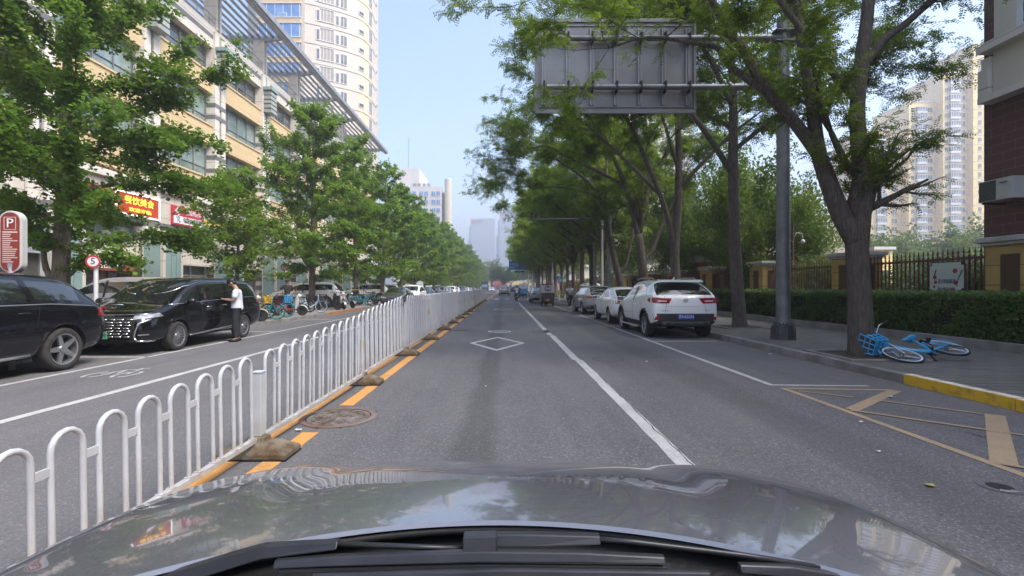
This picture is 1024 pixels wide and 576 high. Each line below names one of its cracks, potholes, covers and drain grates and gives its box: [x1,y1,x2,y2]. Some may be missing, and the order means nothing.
manhole cover [298,407,377,429]
manhole cover [976,480,1024,494]
